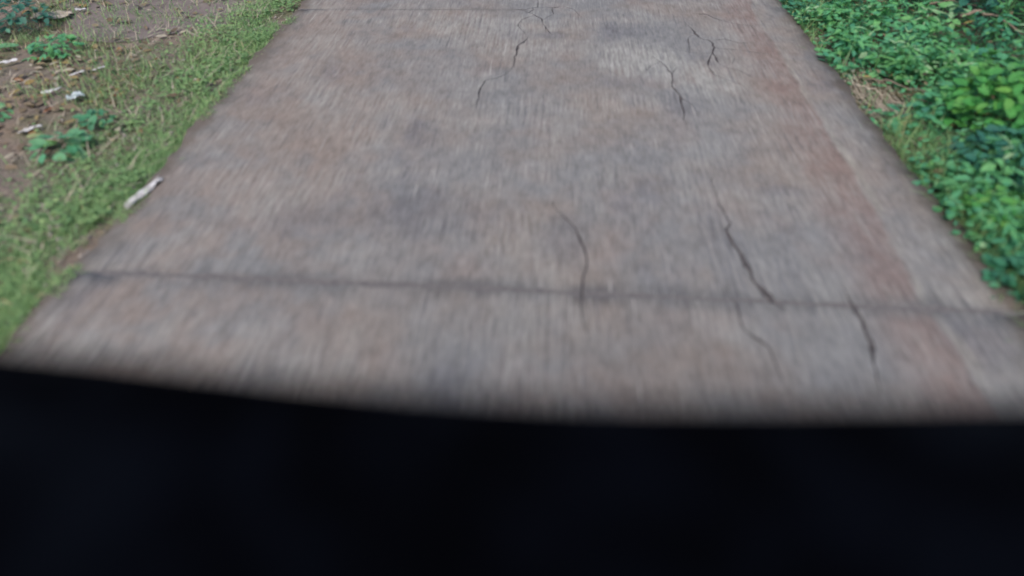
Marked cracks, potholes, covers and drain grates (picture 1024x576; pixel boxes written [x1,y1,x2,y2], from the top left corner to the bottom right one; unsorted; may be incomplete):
crack [476,5,577,104]
